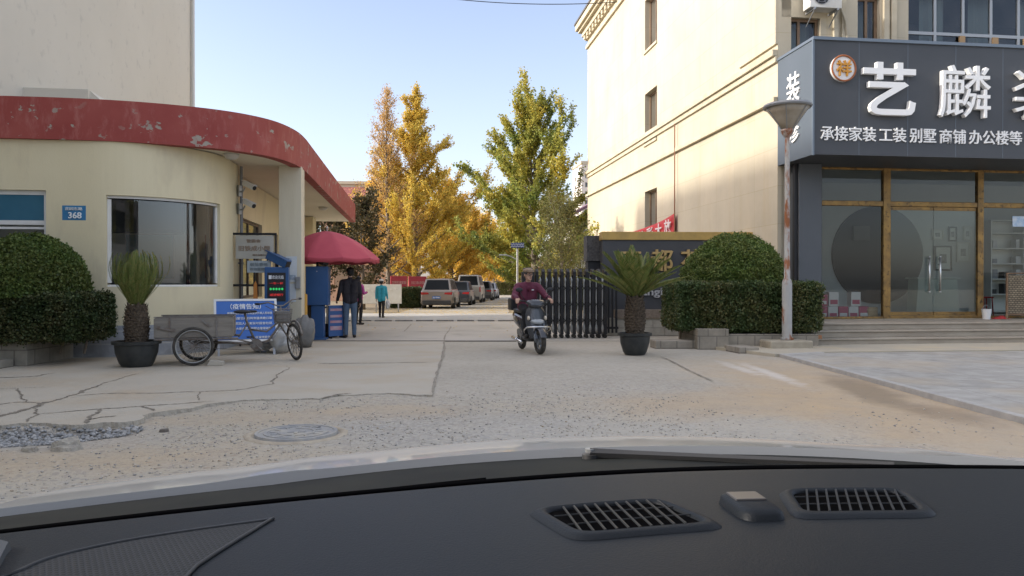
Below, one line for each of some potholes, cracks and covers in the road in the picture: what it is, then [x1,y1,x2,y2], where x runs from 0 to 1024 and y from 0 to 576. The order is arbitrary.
crack [0,369,288,423]
manhole cover [243,424,348,445]
pothole [0,424,144,448]
